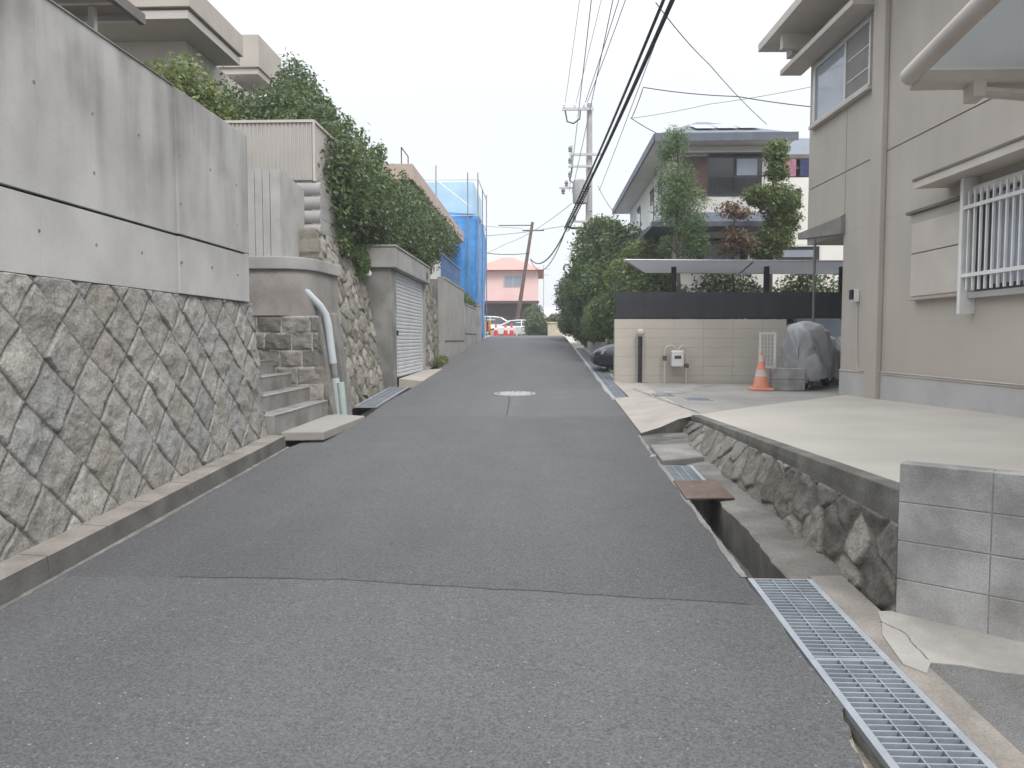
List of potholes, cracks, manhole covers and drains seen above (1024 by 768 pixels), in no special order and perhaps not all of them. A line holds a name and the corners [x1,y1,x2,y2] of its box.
drain grate [368,392,400,400]
drain grate [748,578,891,663]
drain grate [808,659,998,768]
drain grate [354,399,390,408]
drain grate [663,465,706,480]
